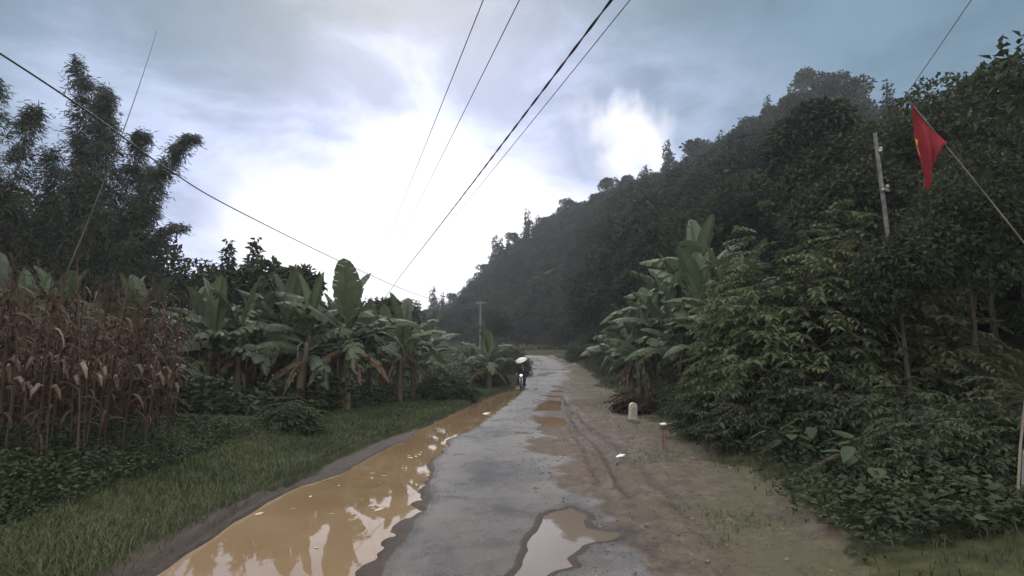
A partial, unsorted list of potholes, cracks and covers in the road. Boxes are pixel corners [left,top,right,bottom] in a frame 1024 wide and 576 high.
pothole [507,506,625,576]
pothole [532,415,572,430]
pothole [533,400,564,411]
